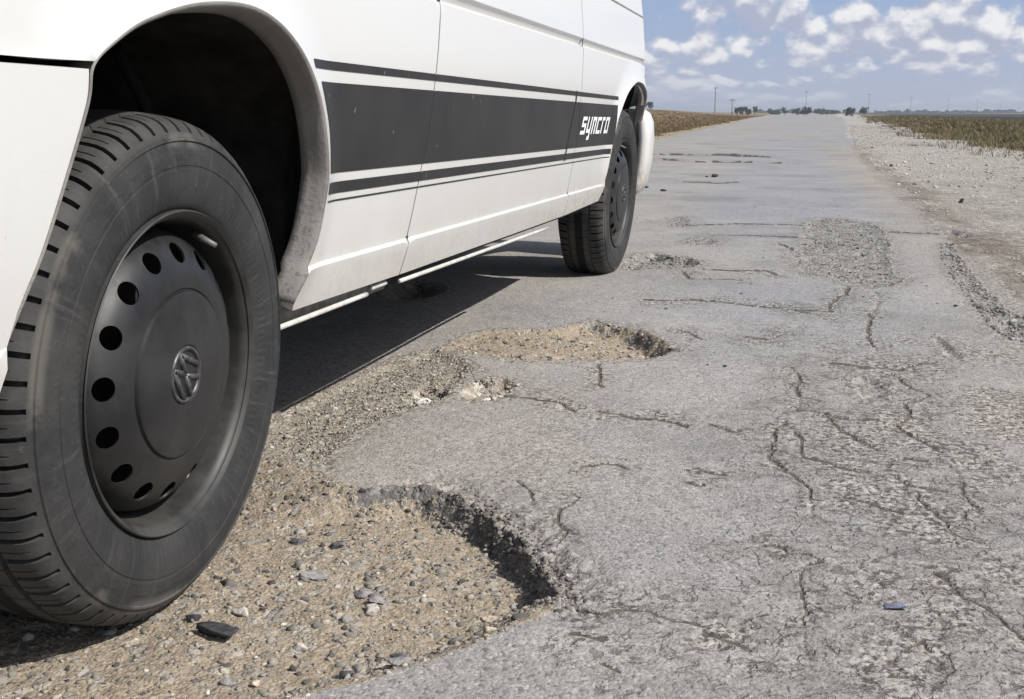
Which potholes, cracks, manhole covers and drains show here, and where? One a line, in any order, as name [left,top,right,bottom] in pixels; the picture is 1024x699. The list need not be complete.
crack [598,411,689,428]
crack [904,640,931,653]
pothole [443,323,671,361]
crack [682,269,778,281]
crack [643,286,984,529]
crack [555,494,581,541]
pothole [0,456,559,699]
pothole [399,387,452,407]
crack [689,223,802,250]
crack [595,363,604,388]
pothole [621,253,702,270]
crack [931,571,1023,641]
